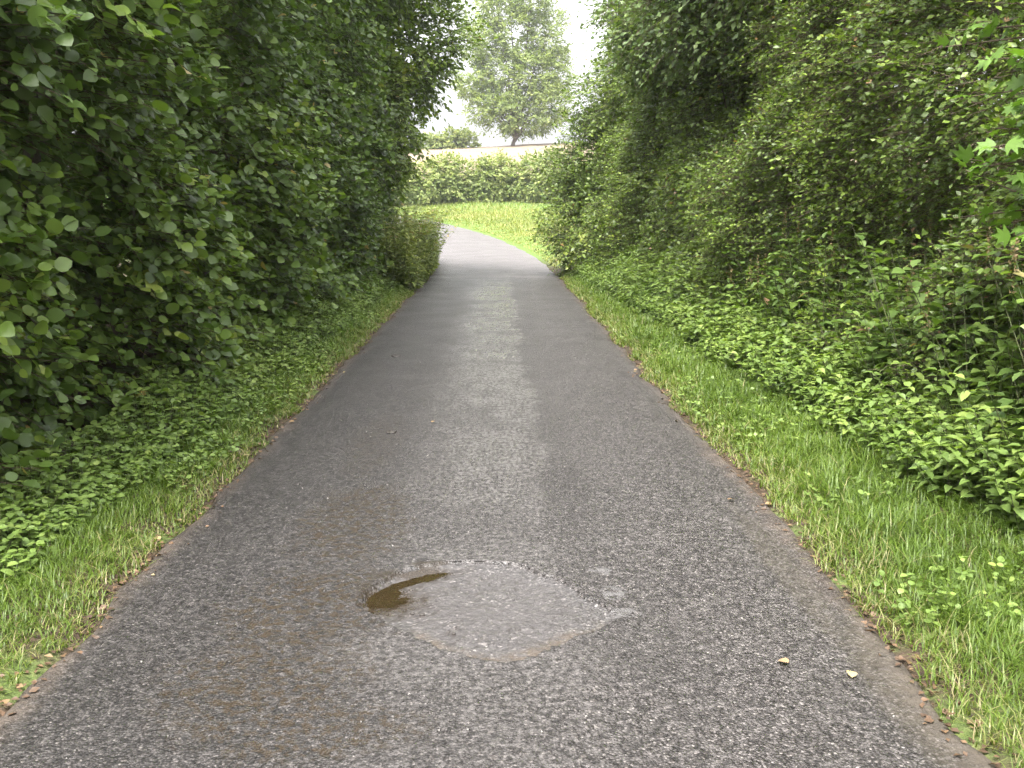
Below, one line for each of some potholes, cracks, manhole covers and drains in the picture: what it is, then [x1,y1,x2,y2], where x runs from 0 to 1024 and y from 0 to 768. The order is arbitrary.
pothole [347,557,631,668]
